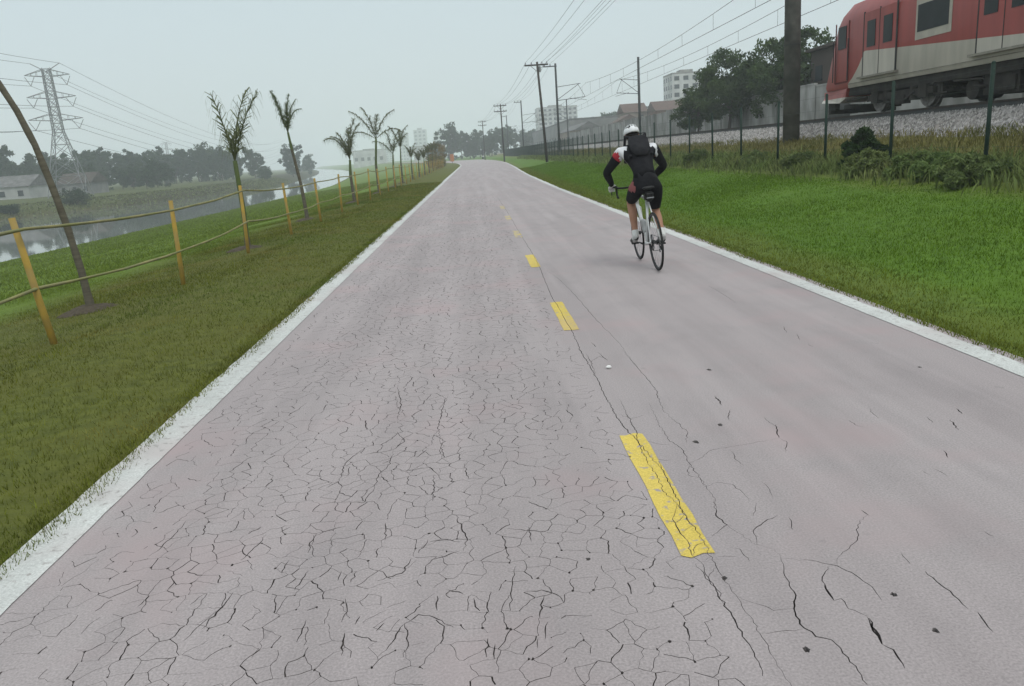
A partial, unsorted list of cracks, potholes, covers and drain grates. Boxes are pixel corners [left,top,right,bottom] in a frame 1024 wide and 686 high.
crack [901,553,992,631]
crack [502,204,905,686]
crack [0,196,745,686]
